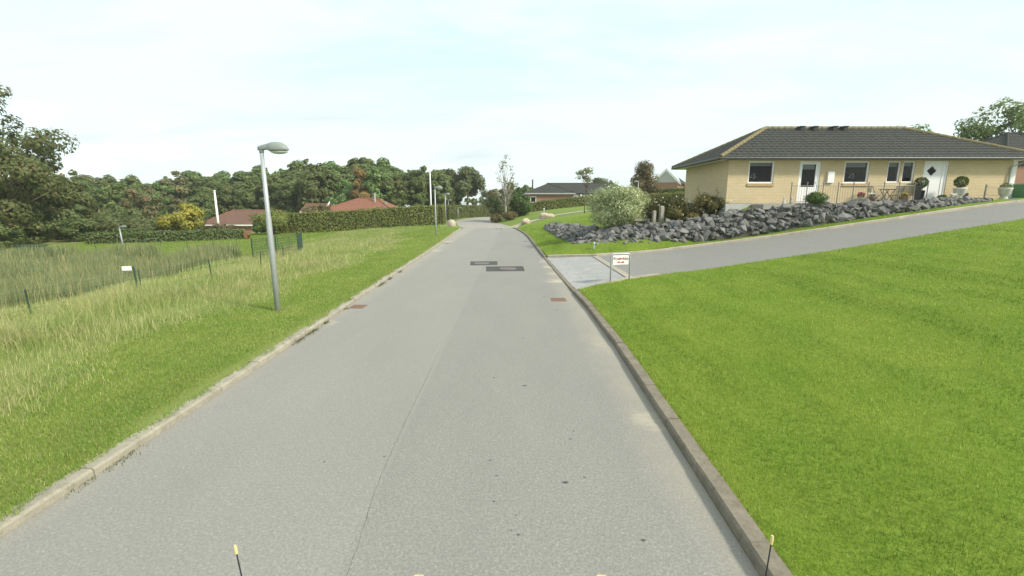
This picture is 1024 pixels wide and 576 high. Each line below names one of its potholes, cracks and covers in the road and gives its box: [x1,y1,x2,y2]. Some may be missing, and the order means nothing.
crack [346,367,432,576]
